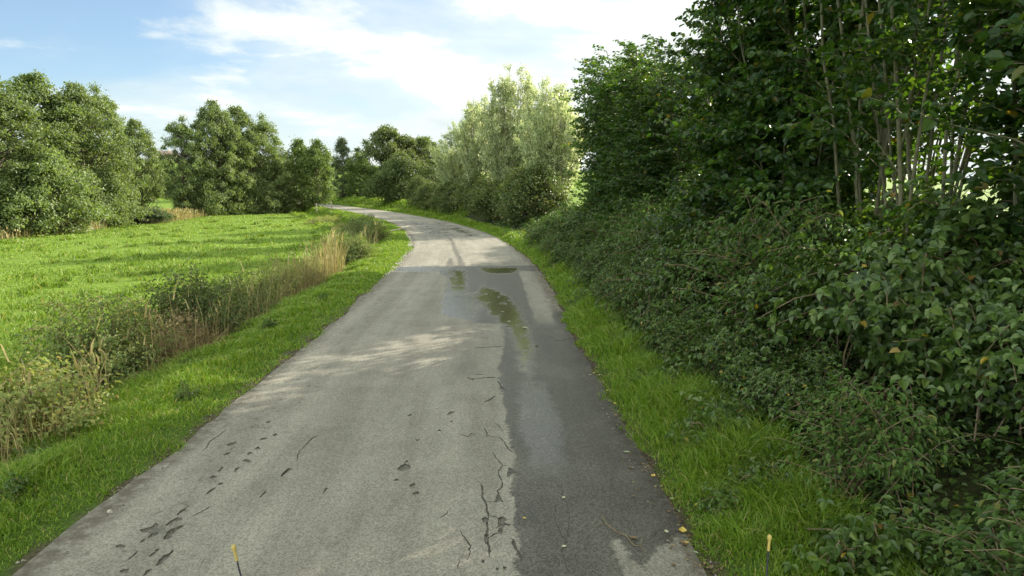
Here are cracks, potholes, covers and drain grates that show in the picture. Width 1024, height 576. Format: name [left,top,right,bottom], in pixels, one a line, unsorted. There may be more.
crack [554,483,571,572]
crack [442,423,522,568]
crack [475,374,507,402]
